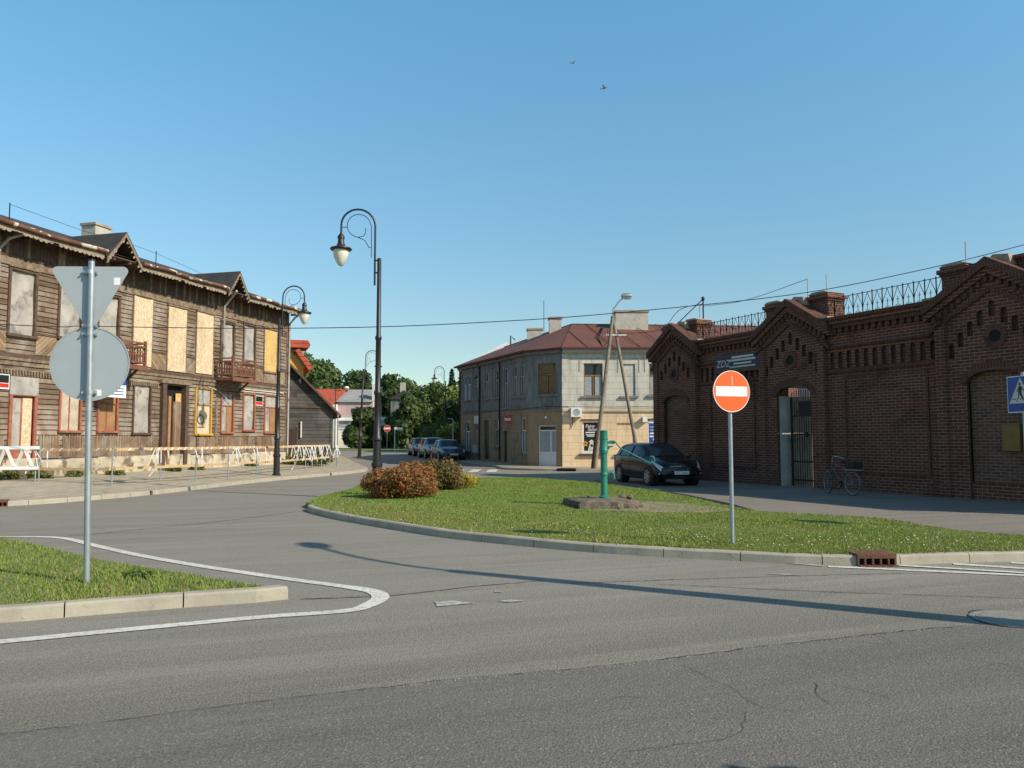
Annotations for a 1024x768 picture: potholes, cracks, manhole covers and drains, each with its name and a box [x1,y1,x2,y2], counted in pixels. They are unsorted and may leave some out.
drain grate [846,550,900,567]
manhole cover [968,609,1024,628]
crack [629,666,764,751]
